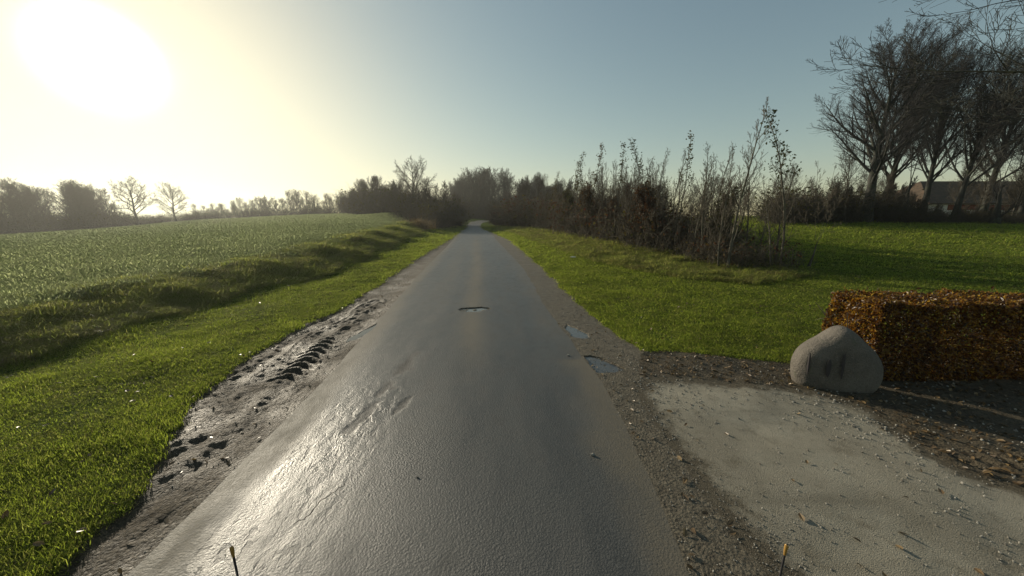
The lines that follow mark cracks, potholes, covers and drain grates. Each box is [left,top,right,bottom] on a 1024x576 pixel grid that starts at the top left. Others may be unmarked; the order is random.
pothole [584,355,626,373]
